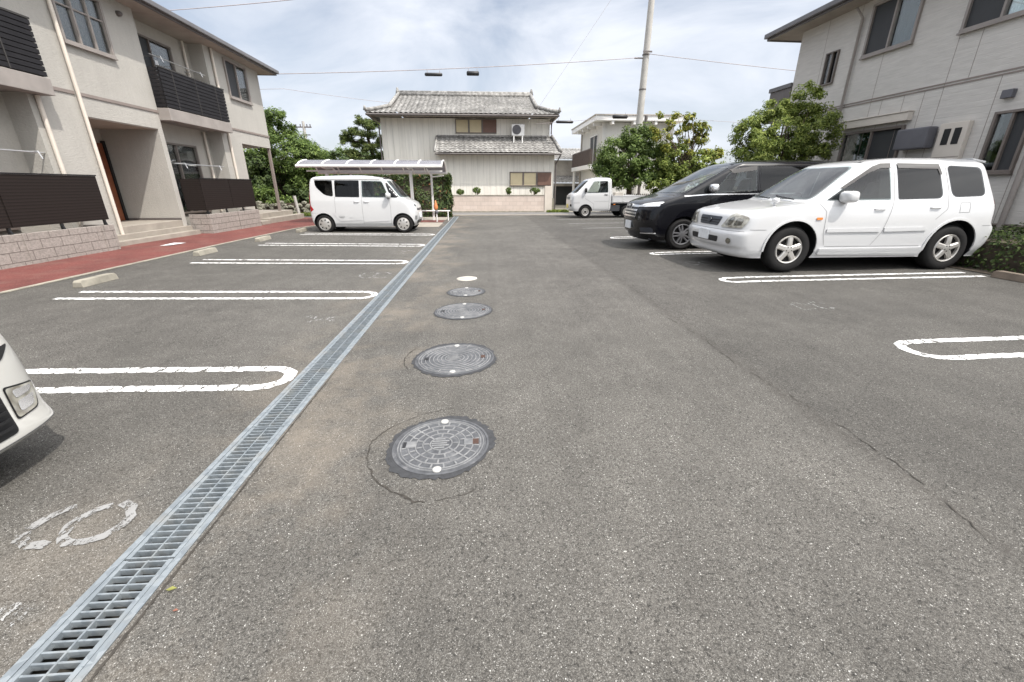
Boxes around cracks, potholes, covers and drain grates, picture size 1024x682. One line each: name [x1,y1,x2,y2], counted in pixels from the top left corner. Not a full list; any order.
manhole cover [411,343,497,377]
drain grate [0,217,458,682]
manhole cover [447,287,486,297]
crack [366,408,473,503]
manhole cover [385,416,496,480]
manhole cover [434,303,493,320]
